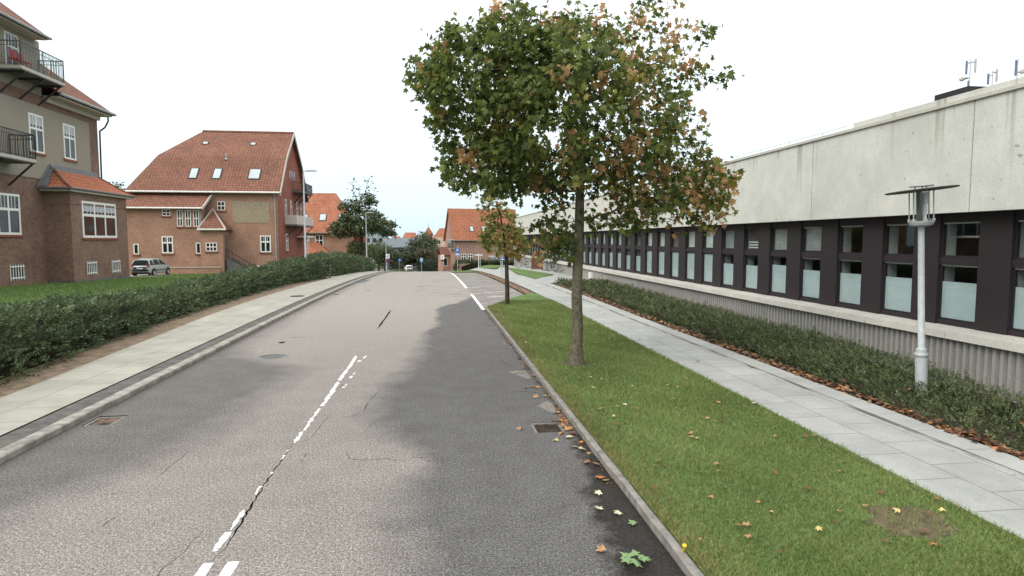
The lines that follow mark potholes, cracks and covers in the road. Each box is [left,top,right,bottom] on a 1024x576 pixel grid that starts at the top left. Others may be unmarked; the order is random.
drain grate [530,422,565,433]
drain grate [84,416,126,426]
crack [220,393,382,553]
